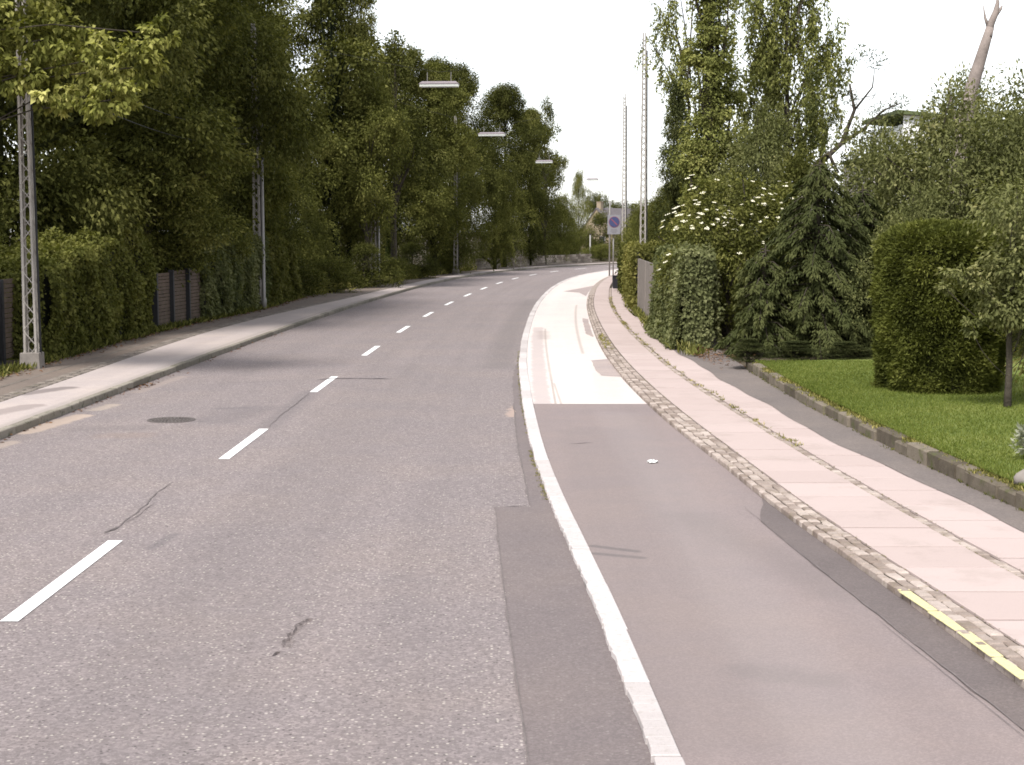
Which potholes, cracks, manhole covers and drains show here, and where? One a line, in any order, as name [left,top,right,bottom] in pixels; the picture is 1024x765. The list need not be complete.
crack [272,618,312,656]
crack [105,482,172,533]
crack [230,378,389,427]
